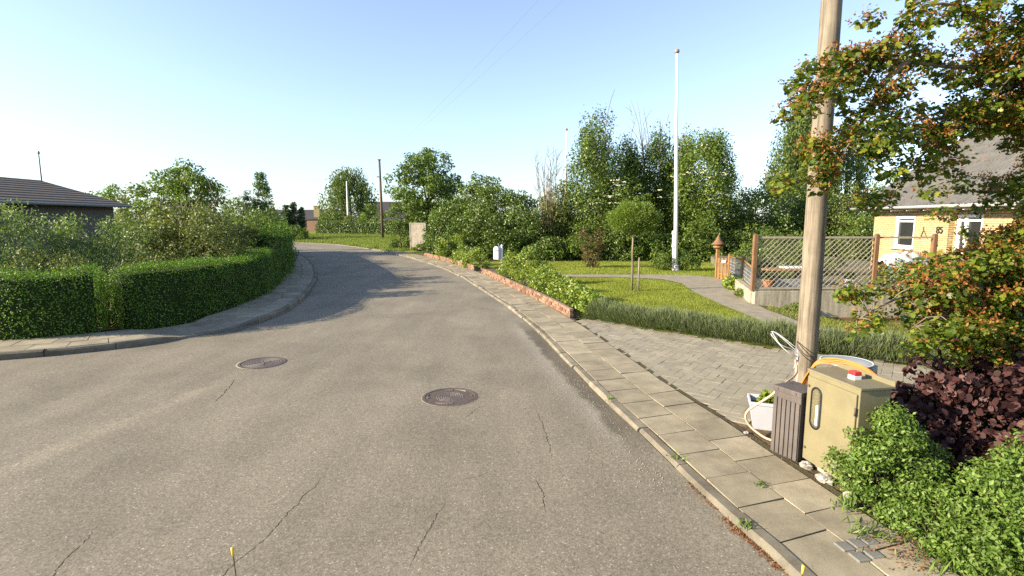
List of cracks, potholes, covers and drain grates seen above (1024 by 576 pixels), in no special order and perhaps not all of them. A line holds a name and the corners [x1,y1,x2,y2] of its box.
manhole cover [421,388,479,407]
manhole cover [235,357,287,369]
